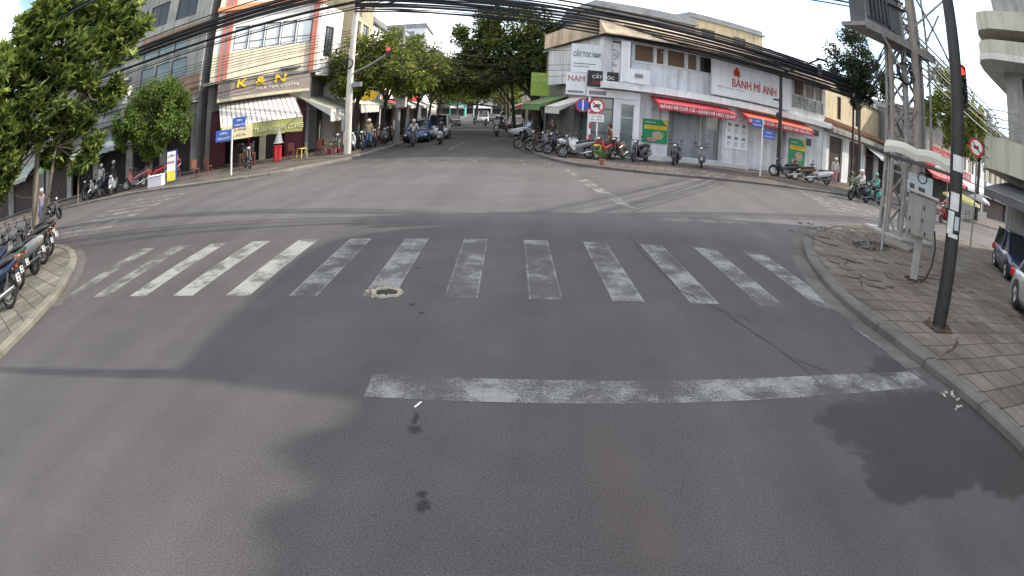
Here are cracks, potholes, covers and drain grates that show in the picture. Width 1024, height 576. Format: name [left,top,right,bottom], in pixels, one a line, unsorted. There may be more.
crack [629,231,842,388]
